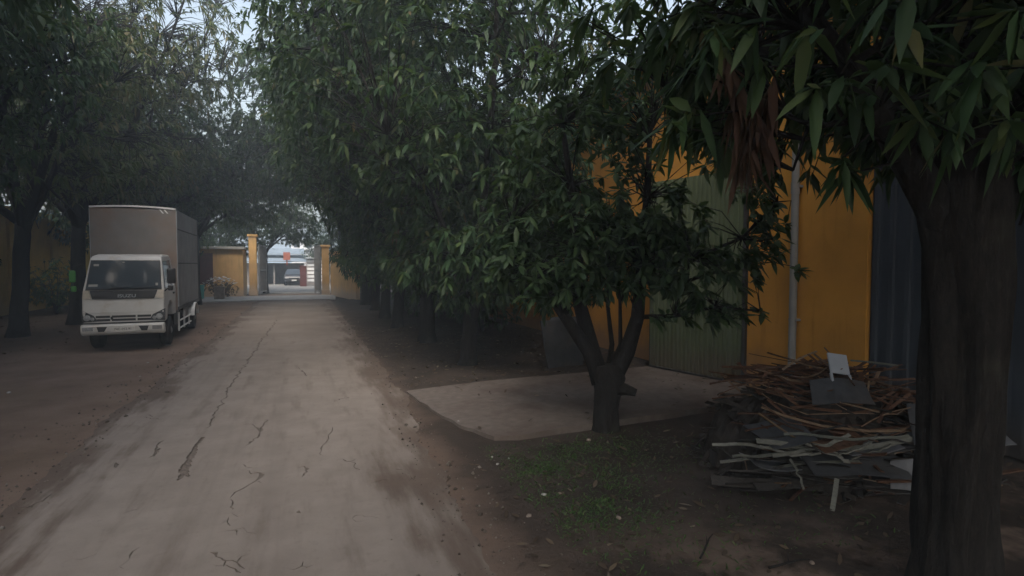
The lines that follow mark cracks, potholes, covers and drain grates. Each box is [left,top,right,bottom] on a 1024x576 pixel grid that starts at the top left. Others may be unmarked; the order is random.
crack [207,320,277,428]
crack [210,552,243,573]
crack [249,420,268,444]
crack [227,464,265,534]
